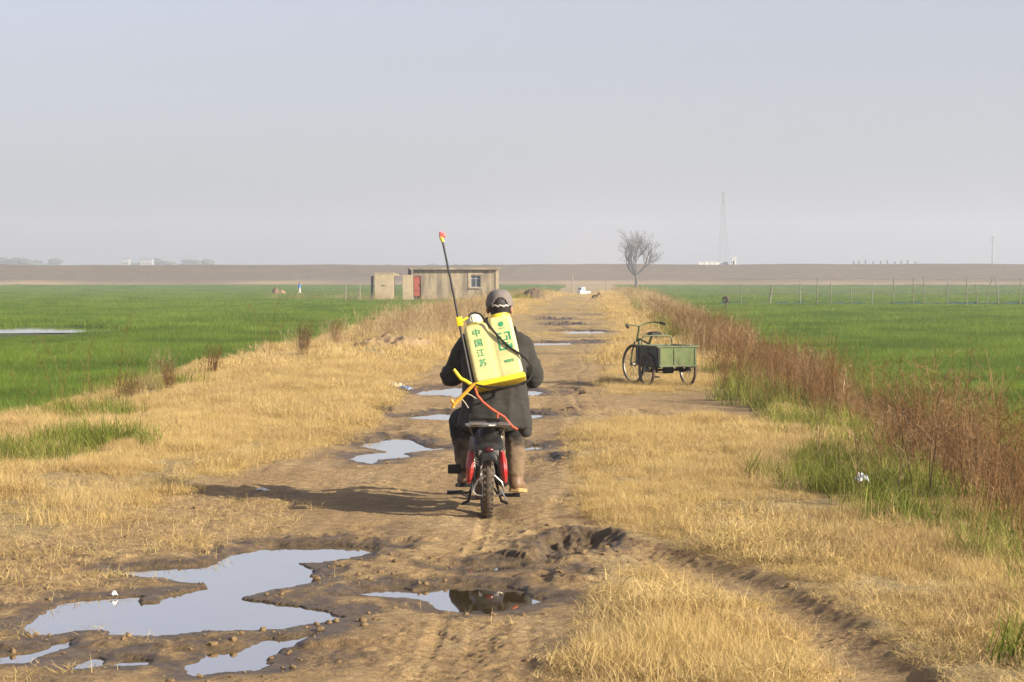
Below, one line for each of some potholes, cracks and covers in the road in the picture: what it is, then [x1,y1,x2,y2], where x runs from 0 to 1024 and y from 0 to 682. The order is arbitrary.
pothole [343,434,454,465]
pothole [413,385,547,397]
pothole [10,539,392,638]
pothole [167,630,324,677]
pothole [349,579,556,615]
pothole [513,525,627,562]
